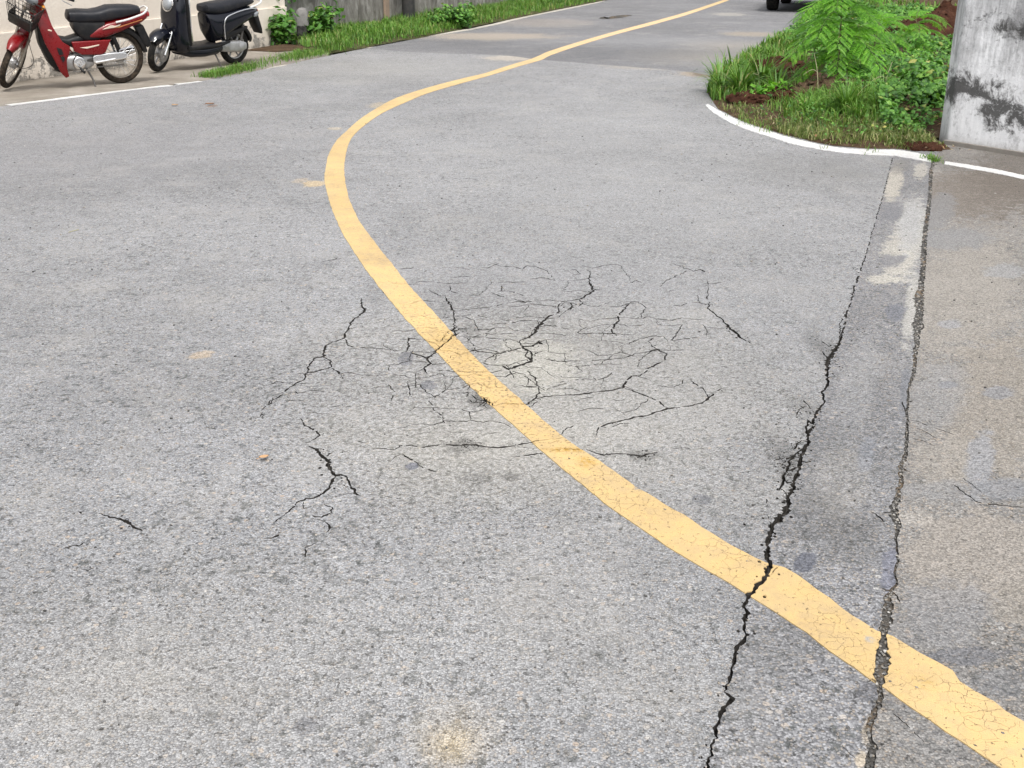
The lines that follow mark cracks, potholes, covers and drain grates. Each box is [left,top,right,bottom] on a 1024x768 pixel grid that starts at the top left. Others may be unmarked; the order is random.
crack [374,158,893,768]
crack [61,511,142,550]
crack [954,478,1023,508]
crack [255,298,657,557]
